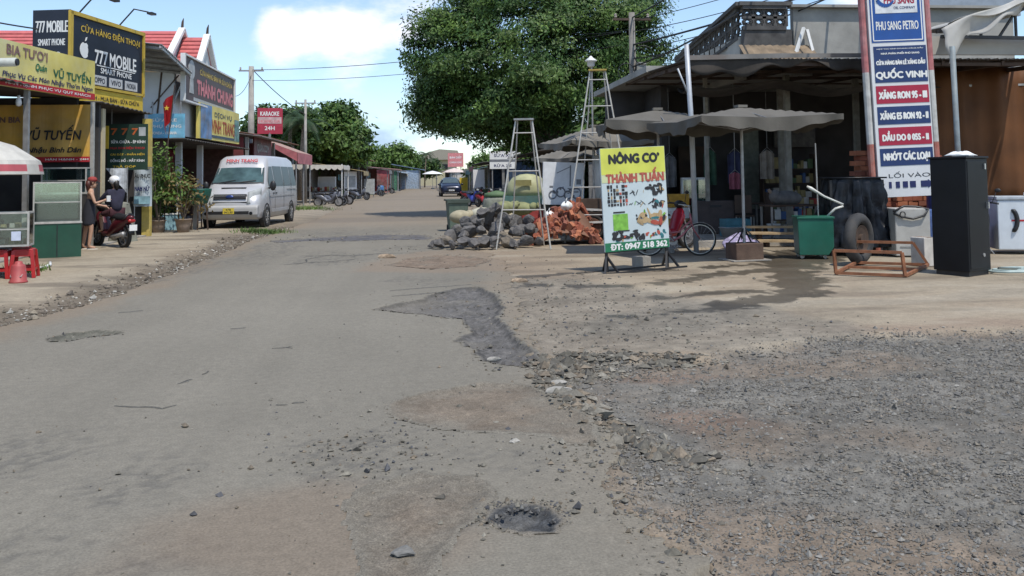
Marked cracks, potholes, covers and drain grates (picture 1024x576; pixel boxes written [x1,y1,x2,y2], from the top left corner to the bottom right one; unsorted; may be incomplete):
pothole [481,501,568,538]
